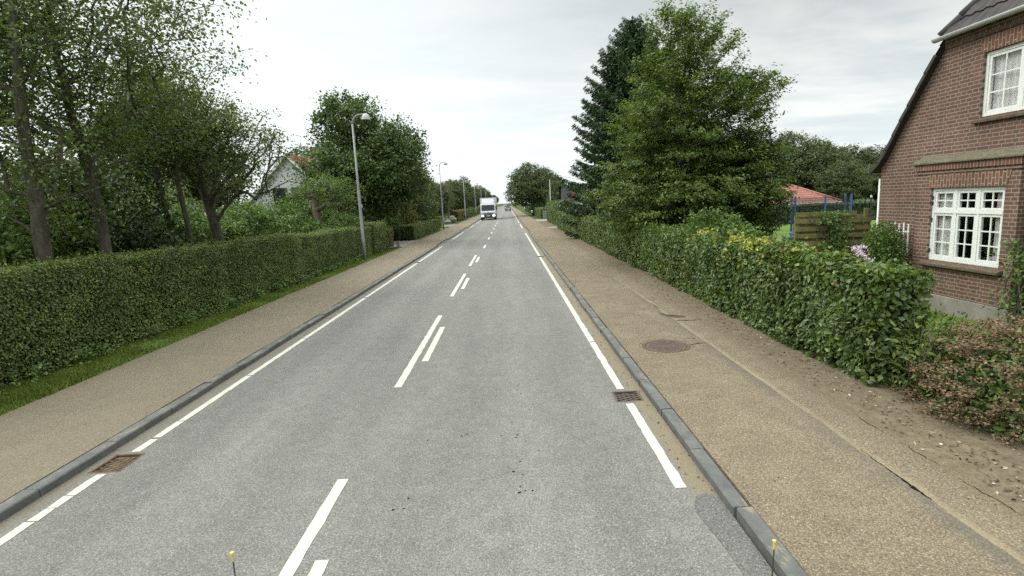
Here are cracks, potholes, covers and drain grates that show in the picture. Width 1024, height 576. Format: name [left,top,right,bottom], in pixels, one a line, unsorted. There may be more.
drain grate [611,390,644,402]
manhole cover [639,340,693,353]
drain grate [87,453,146,474]
crack [856,415,1024,516]
